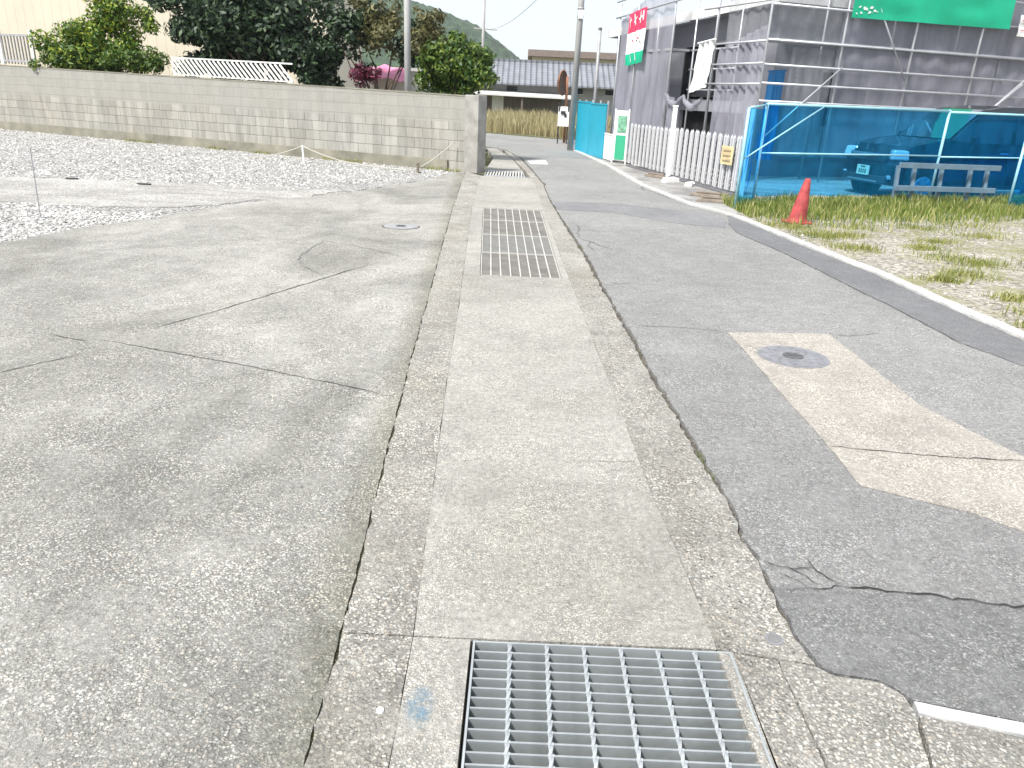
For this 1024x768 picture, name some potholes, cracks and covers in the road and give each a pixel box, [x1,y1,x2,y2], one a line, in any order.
crack [835,446,1024,461]
crack [105,340,395,397]
crack [769,558,1024,608]
drain grate [460,640,774,768]
crack [158,241,395,327]
drain grate [484,170,527,178]
manhole cover [757,346,830,369]
drain grate [483,208,544,222]
drain grate [482,234,554,255]
drain grate [482,220,548,237]
drain grate [481,252,561,279]
